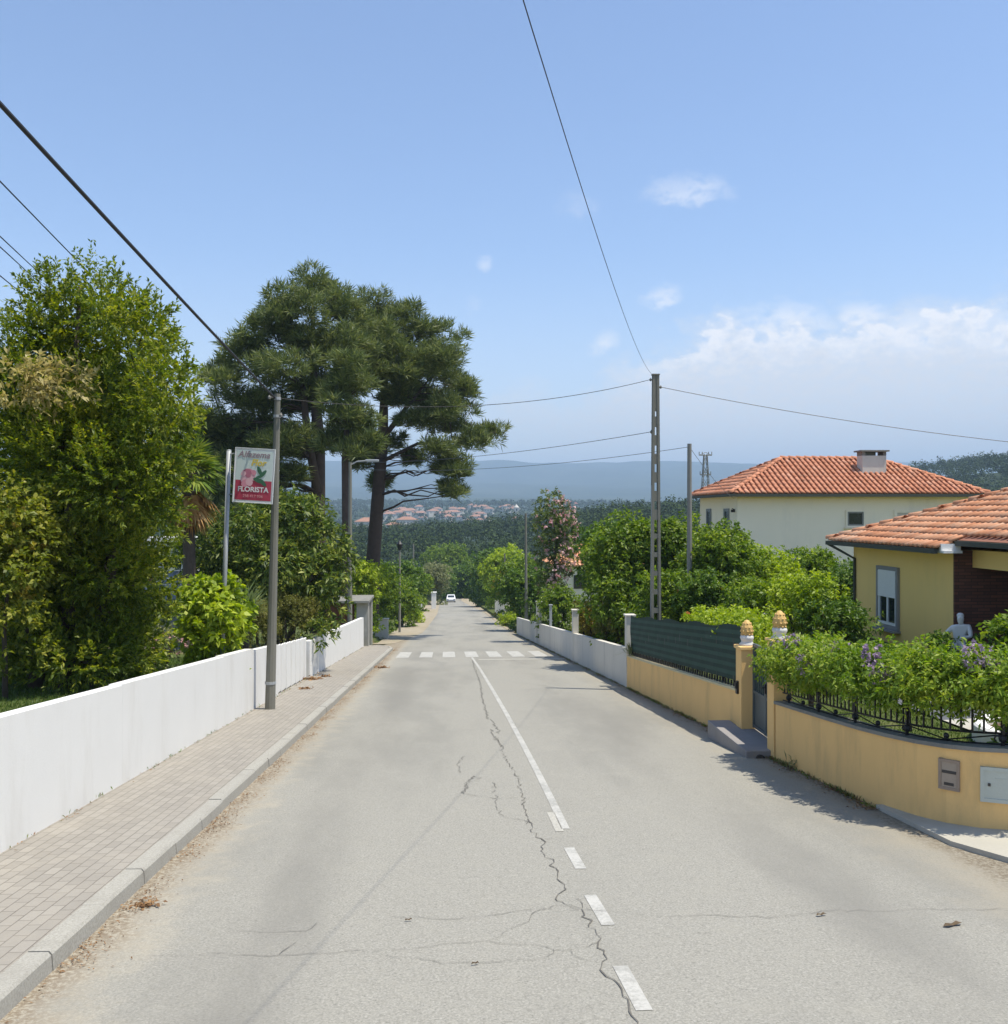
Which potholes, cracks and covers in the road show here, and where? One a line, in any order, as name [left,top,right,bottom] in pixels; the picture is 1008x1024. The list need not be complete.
crack [123,660,995,1024]
